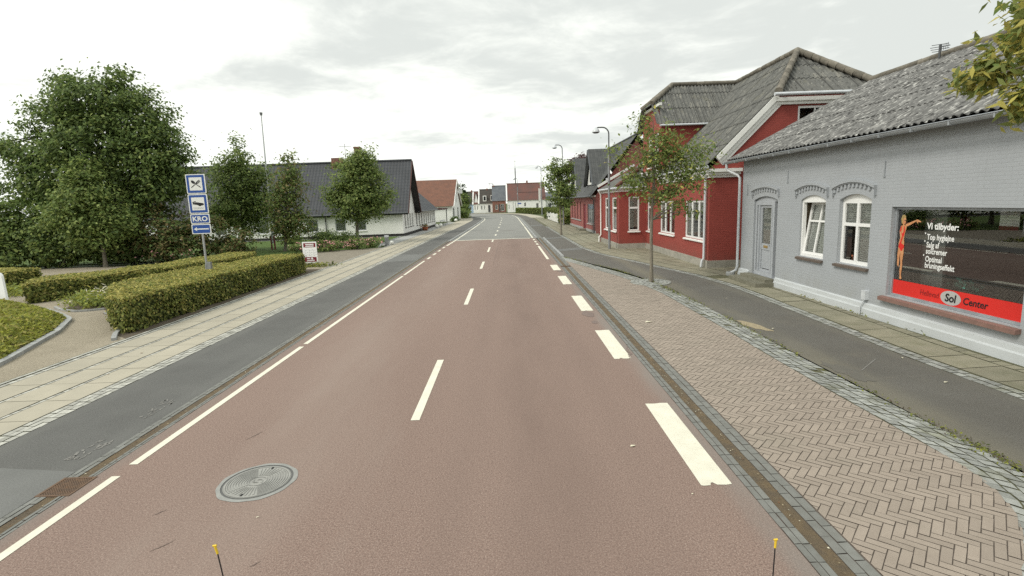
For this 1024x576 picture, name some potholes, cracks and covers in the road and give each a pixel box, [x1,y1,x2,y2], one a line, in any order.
drain grate [34,476,98,498]
manhole cover [215,463,298,502]
